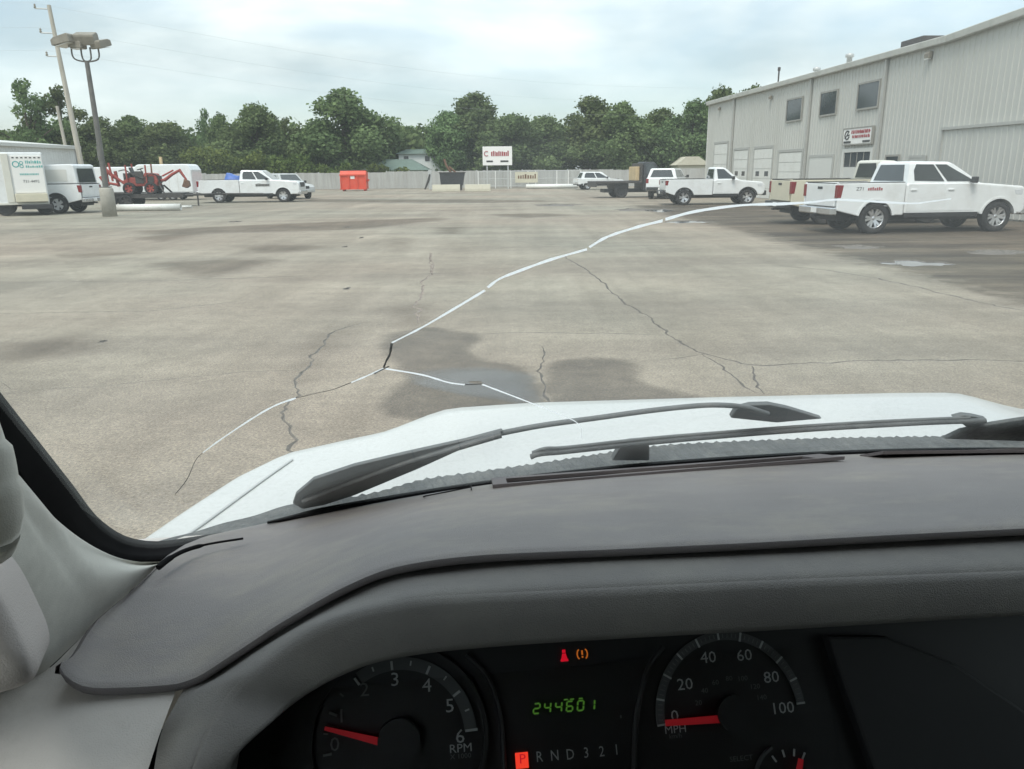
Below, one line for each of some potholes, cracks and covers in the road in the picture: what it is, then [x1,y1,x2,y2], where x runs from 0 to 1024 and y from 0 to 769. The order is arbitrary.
crack [151,253,463,323]
crack [488,254,1024,402]
crack [0,323,362,452]
